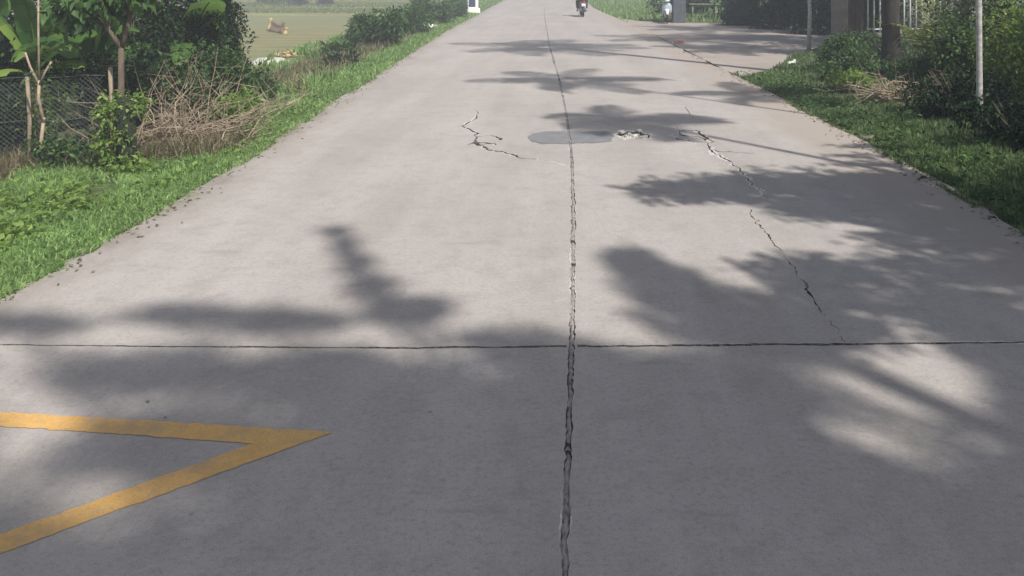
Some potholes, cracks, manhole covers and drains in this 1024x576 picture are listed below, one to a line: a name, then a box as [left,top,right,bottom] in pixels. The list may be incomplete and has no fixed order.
crack [667,107,850,345]
crack [461,8,577,576]
pothole [614,129,655,140]
